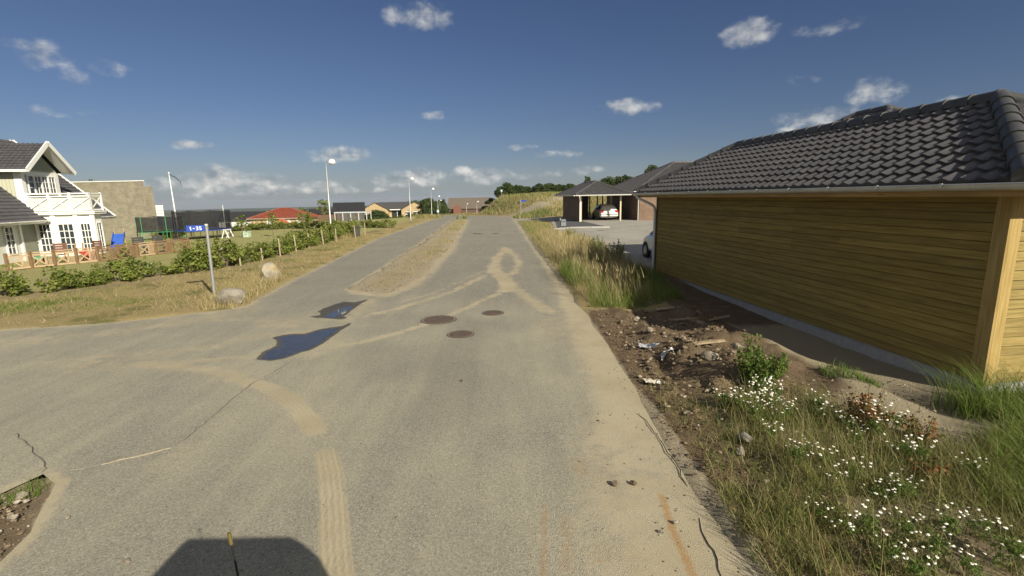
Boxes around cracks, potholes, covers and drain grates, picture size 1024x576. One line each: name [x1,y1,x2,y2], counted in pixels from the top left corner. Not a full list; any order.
crack [699,518,722,576]
crack [16,432,47,472]
manhole cover [421,315,457,324]
crack [637,414,687,486]
manhole cover [447,330,474,338]
